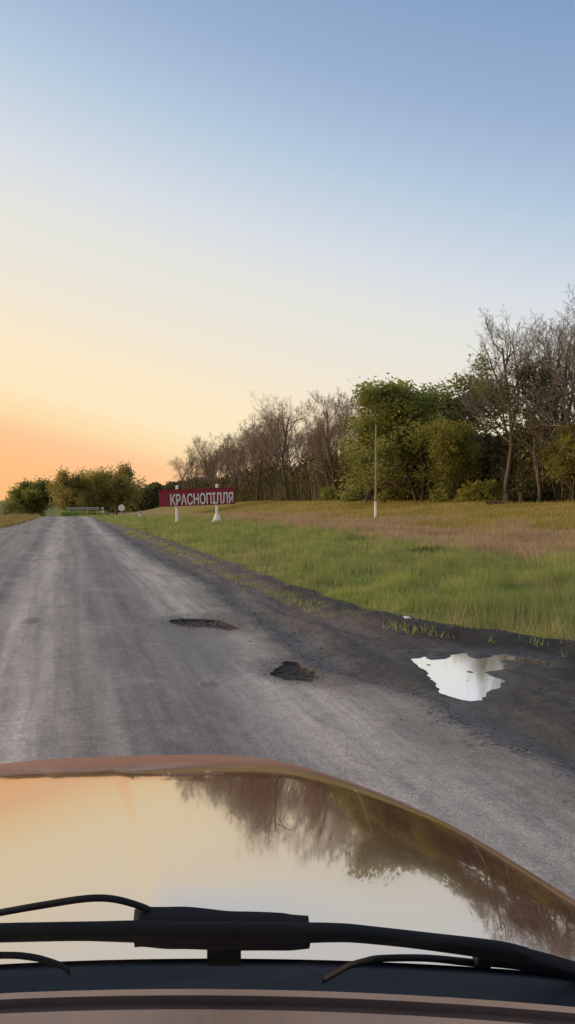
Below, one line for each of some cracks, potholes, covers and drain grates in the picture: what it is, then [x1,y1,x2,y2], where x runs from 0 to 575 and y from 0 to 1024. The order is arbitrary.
pothole [169,618,239,630]
pothole [270,661,320,682]
